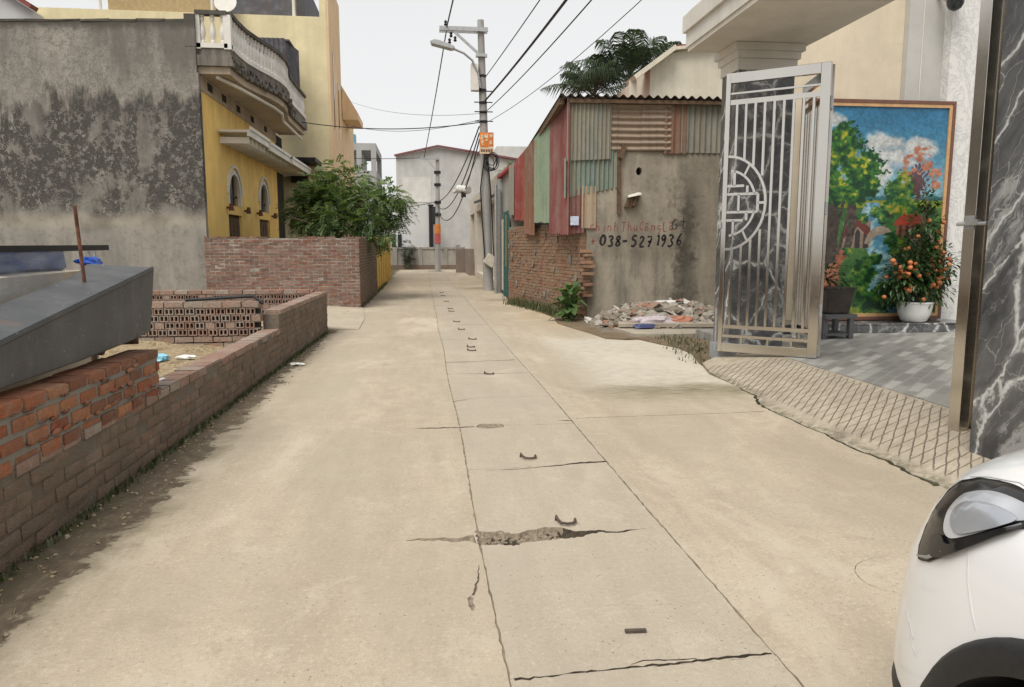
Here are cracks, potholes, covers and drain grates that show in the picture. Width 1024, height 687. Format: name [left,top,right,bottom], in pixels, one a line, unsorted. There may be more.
pothole [475,527,605,546]
crack [407,535,475,543]
crack [514,652,771,681]
